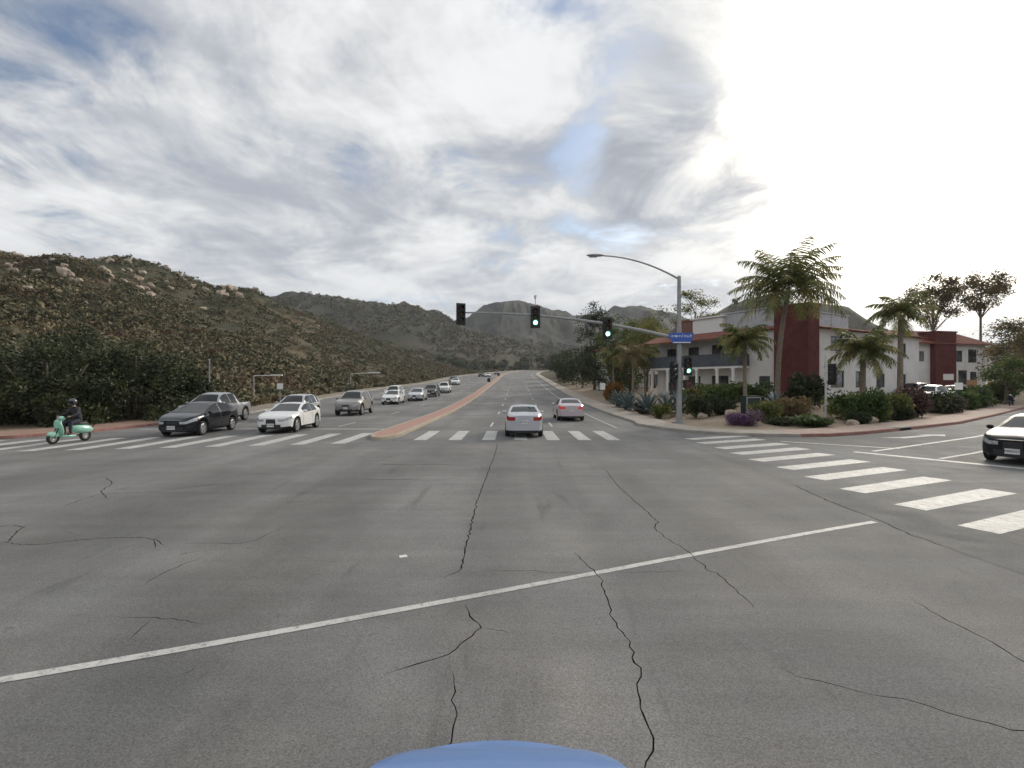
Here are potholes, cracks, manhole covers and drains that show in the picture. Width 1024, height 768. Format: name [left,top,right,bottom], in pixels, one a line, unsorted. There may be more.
crack [444,444,498,578]
crack [122,617,200,638]
crack [392,605,502,745]
crack [786,670,1024,731]
crack [487,553,668,768]
crack [4,525,165,548]
crack [924,606,1024,662]
crack [606,470,754,608]
